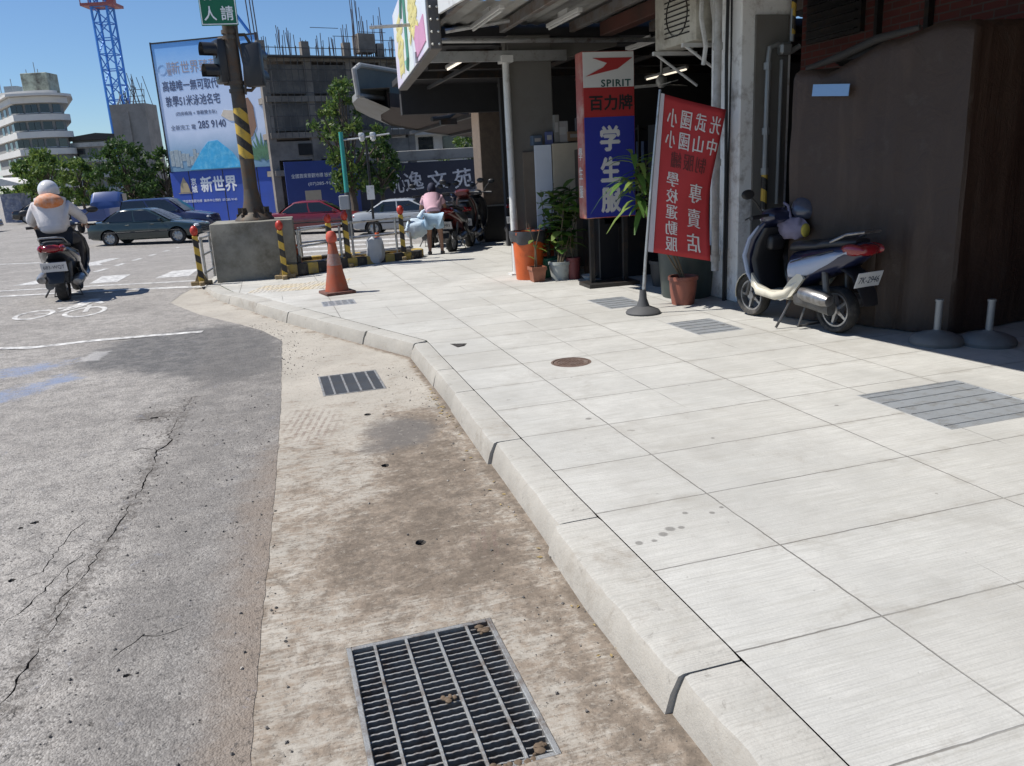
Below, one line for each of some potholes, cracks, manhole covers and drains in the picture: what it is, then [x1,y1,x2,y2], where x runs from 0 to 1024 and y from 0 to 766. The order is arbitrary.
drain grate [318,370,386,396]
drain grate [321,299,356,315]
drain grate [346,618,562,766]
crack [0,399,191,705]
drain grate [857,380,1024,430]
drain grate [588,296,638,309]
drain grate [667,318,743,335]
manhole cover [551,357,591,367]
